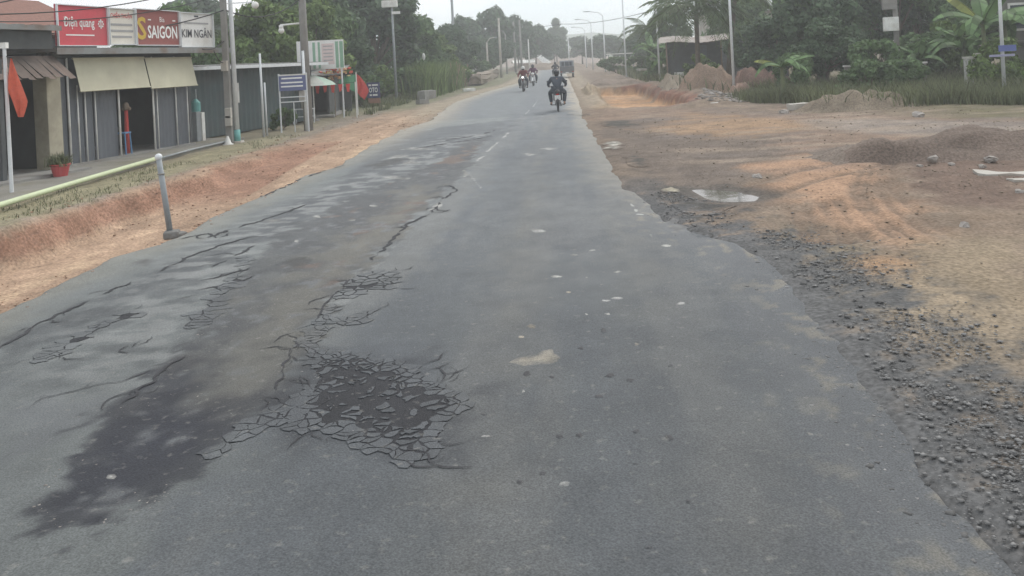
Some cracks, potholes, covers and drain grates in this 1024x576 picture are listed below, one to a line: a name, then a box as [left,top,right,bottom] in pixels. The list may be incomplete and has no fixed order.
crack [308,277,354,321]
crack [0,165,345,347]
crack [395,447,472,468]
crack [370,185,458,260]
crack [274,341,316,391]
